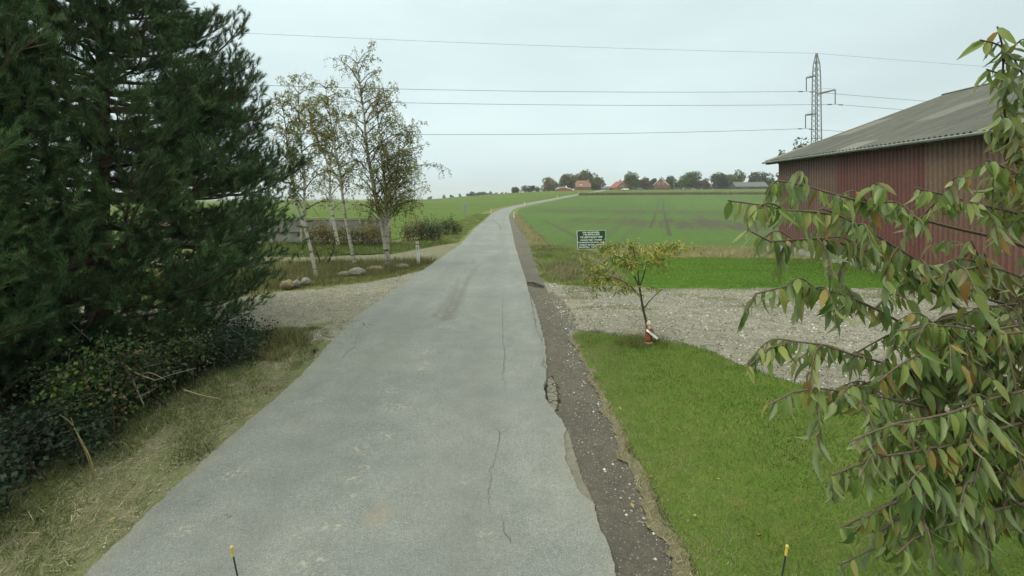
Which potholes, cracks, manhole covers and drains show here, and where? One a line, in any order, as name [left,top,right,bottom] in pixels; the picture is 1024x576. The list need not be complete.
crack [488,426,511,543]
